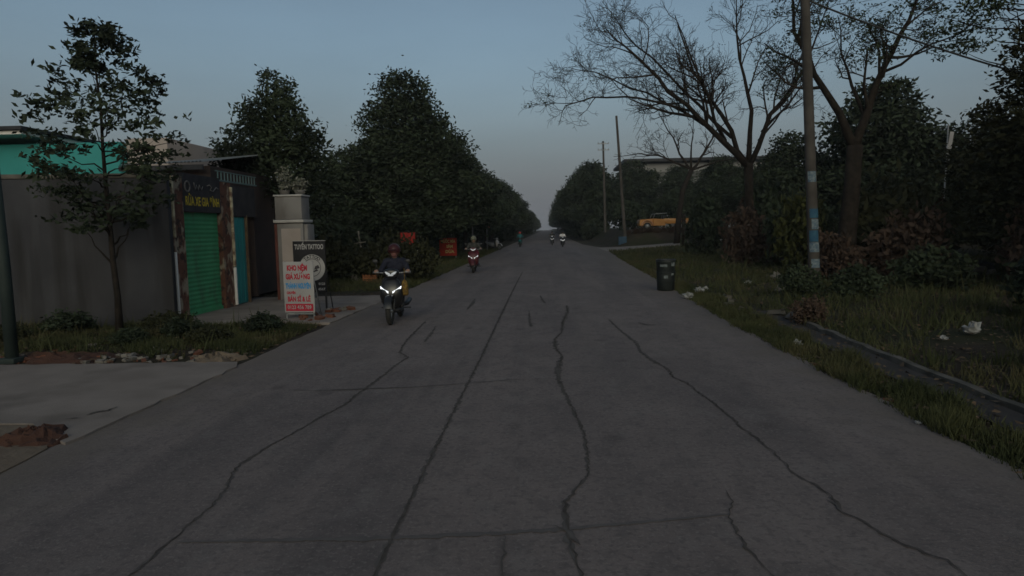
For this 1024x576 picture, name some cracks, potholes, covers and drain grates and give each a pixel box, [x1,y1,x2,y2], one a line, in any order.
crack [610,320,967,576]
crack [528,296,591,576]
crack [128,321,436,576]
